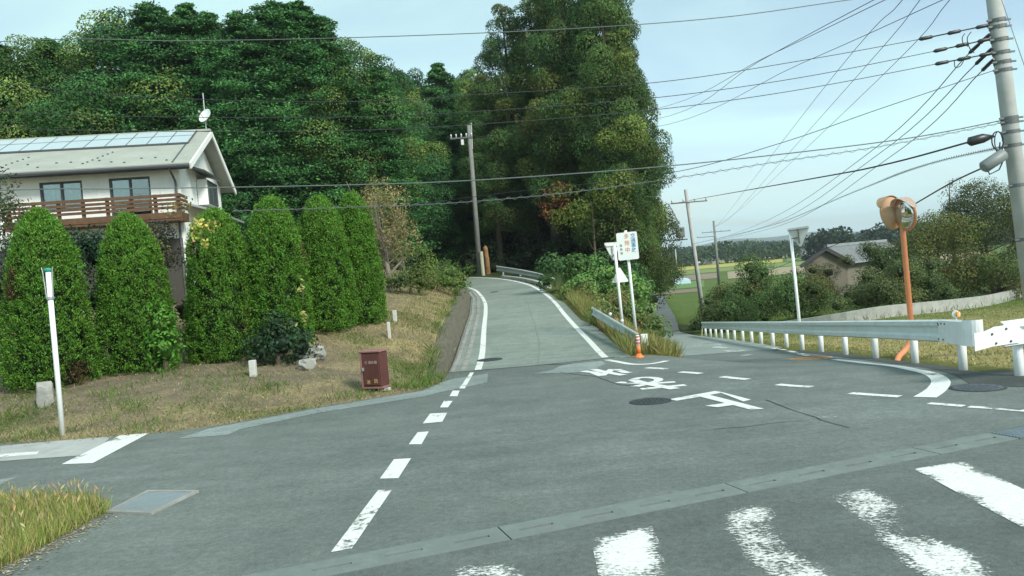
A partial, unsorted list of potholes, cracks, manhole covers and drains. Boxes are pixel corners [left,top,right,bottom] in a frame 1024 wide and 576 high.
crack [717,399,847,429]
manhole cover [949,384,1007,392]
utility cover [106,490,199,515]
